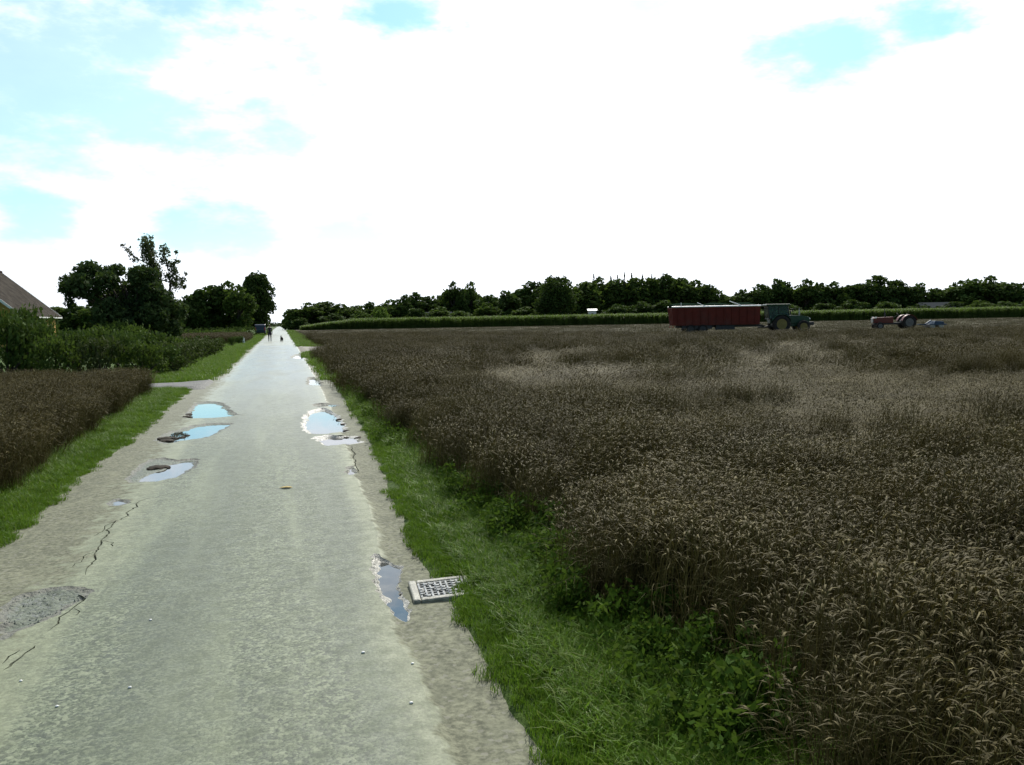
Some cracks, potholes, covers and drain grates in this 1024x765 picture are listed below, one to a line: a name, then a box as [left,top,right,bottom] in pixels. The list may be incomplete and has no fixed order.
pothole [183,401,241,418]
crack [3,595,86,670]
drain grate [408,576,475,604]
pothole [105,498,132,506]
pothole [153,423,234,444]
pothole [311,434,364,446]
pothole [124,457,200,483]
pothole [300,408,349,434]
pothole [369,553,413,622]
crack [72,499,145,575]
